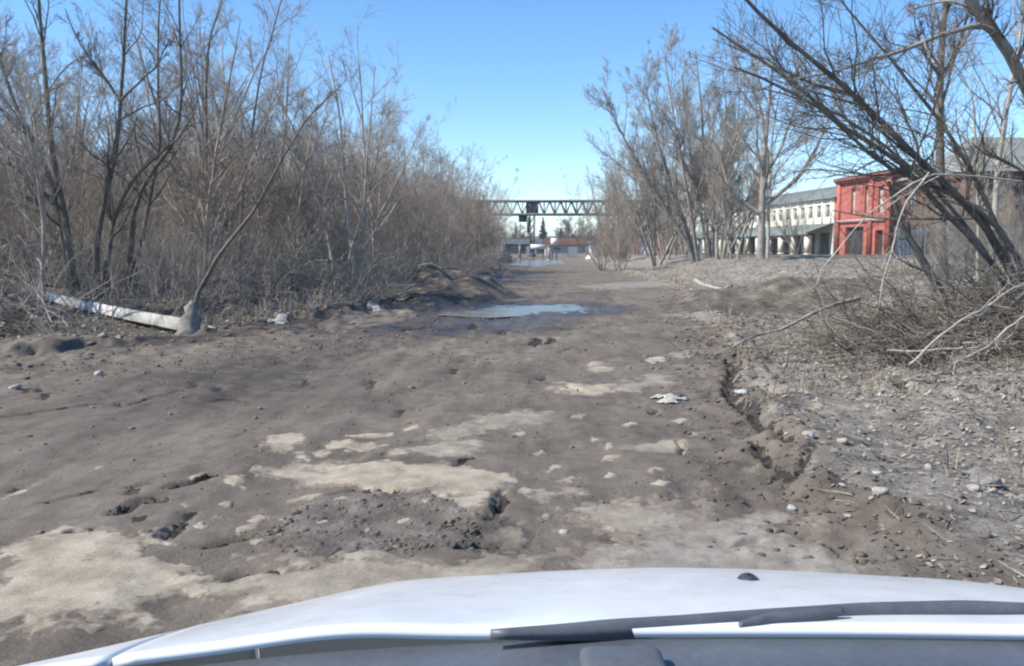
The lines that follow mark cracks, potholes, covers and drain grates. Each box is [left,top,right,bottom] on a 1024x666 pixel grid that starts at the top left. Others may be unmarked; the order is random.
pothole [238,487,509,561]
